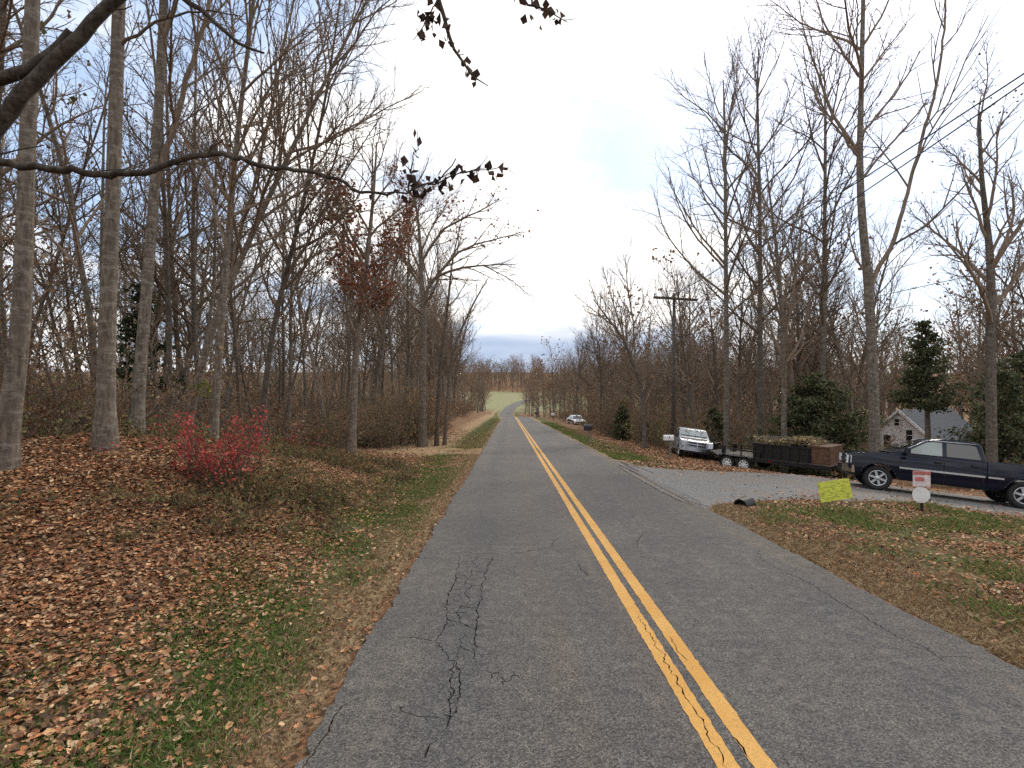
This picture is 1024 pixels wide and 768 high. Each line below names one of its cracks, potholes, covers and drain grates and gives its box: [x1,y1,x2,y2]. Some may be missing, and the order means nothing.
crack [758,551,971,669]
crack [302,698,360,768]
crack [399,552,520,758]
crack [640,620,747,763]
